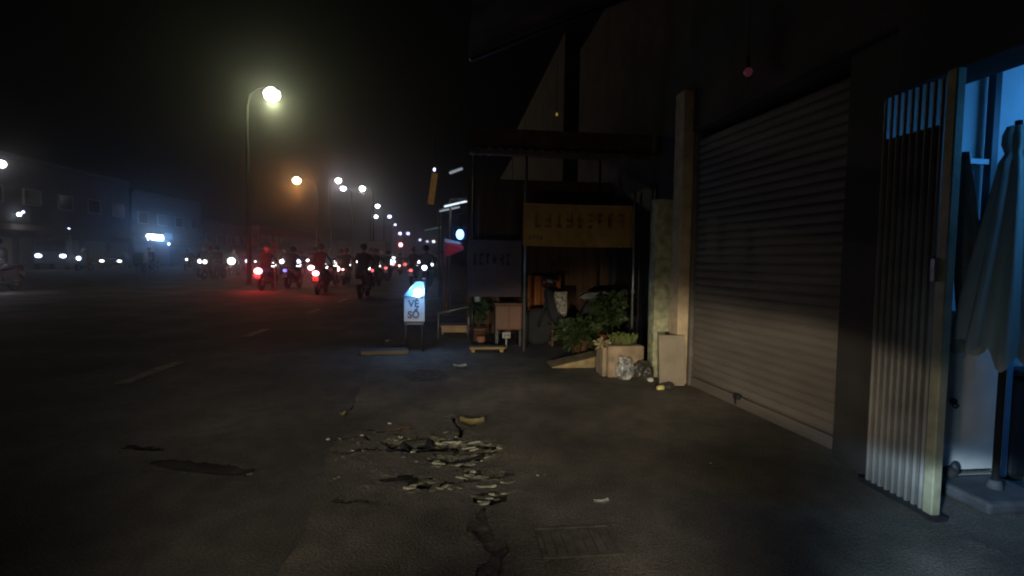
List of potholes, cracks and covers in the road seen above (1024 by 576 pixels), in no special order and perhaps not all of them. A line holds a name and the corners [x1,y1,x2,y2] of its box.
pothole [379,475,418,484]
pothole [424,452,493,470]
crack [429,418,515,489]
pothole [380,435,506,456]
pothole [149,459,256,476]
pothole [473,492,507,510]
crack [467,505,509,576]
pothole [399,477,442,489]
